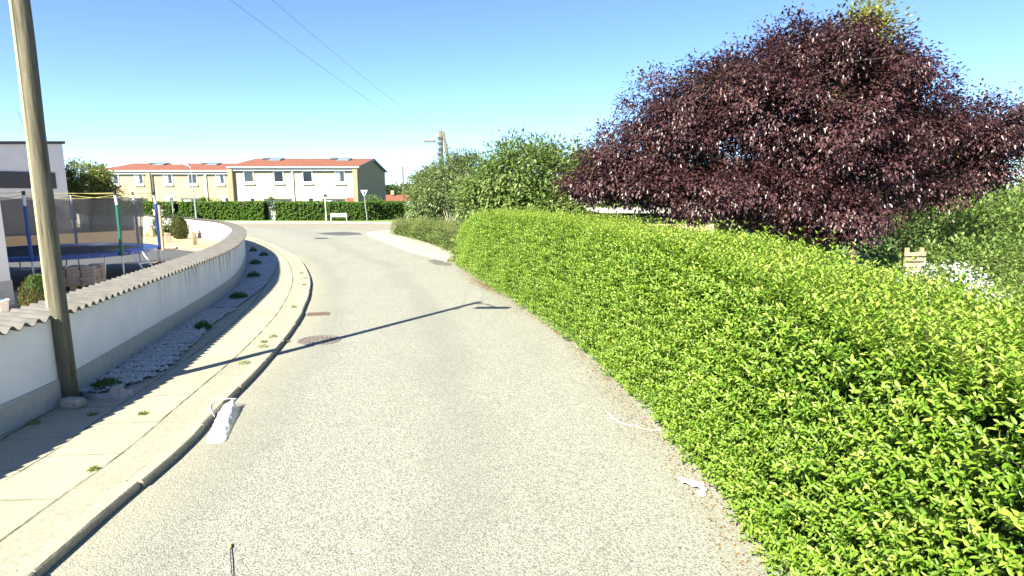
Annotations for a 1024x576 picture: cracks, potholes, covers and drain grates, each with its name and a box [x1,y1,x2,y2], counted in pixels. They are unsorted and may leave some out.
manhole cover [297,335,341,346]
